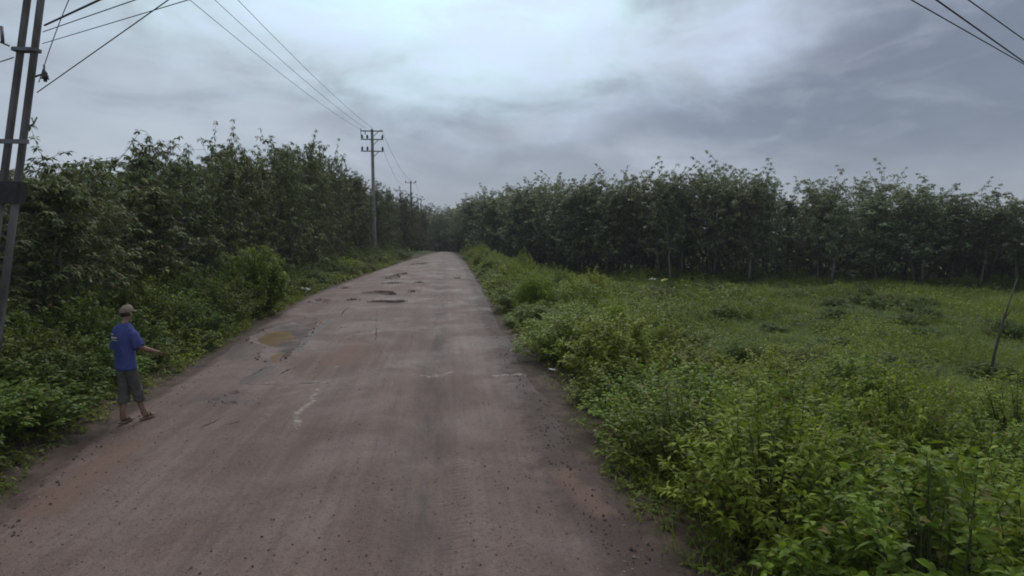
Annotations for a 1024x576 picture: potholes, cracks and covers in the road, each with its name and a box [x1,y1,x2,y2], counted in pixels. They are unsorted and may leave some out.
pothole [249,317,318,361]
